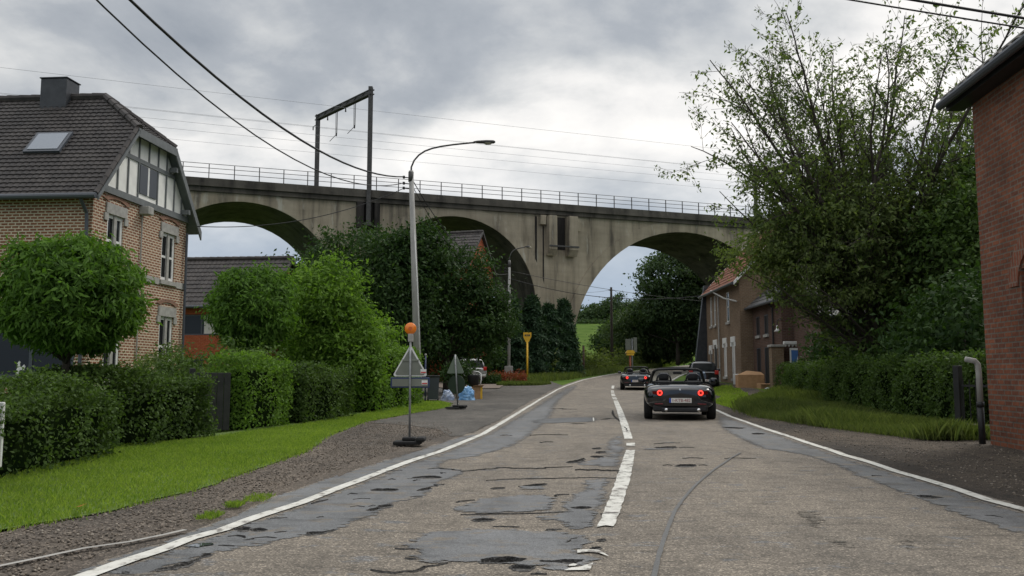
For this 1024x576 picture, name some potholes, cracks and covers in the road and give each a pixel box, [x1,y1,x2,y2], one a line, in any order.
pothole [478,556,527,569]
